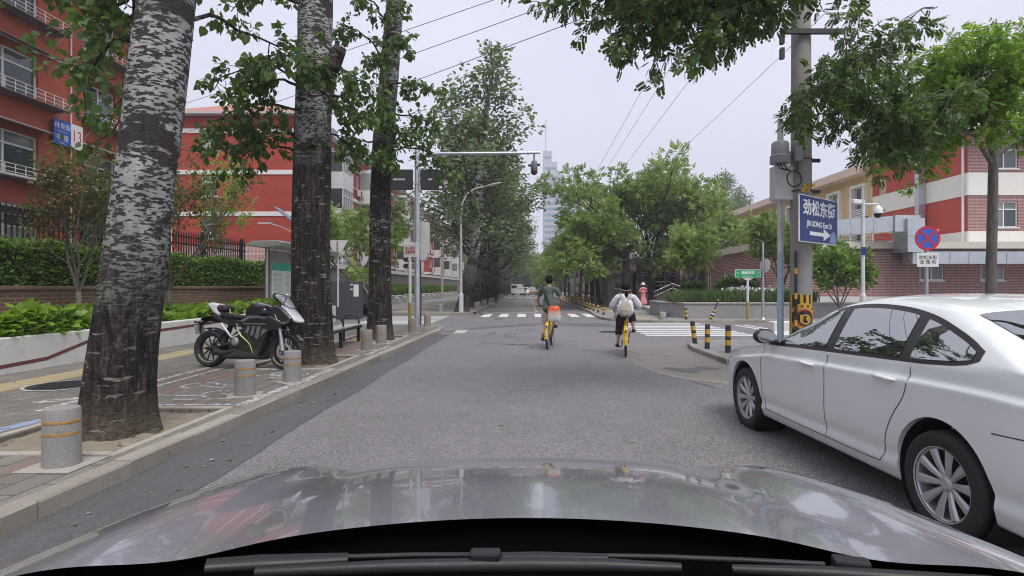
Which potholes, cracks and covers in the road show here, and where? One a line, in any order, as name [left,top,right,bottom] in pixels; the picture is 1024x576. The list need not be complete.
manhole cover [20,380,82,391]
